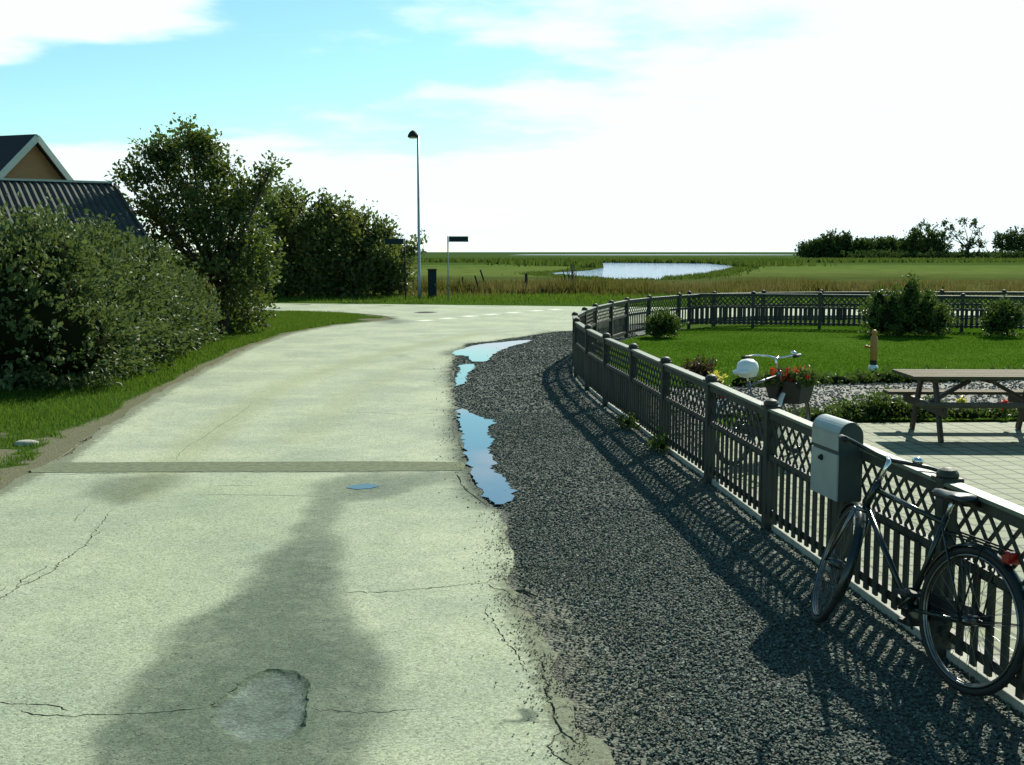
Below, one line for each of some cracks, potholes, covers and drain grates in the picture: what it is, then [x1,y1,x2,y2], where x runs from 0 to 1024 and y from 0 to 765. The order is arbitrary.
crack [0,702,202,717]
crack [0,507,113,599]
crack [348,564,585,765]
pothole [208,669,311,744]
